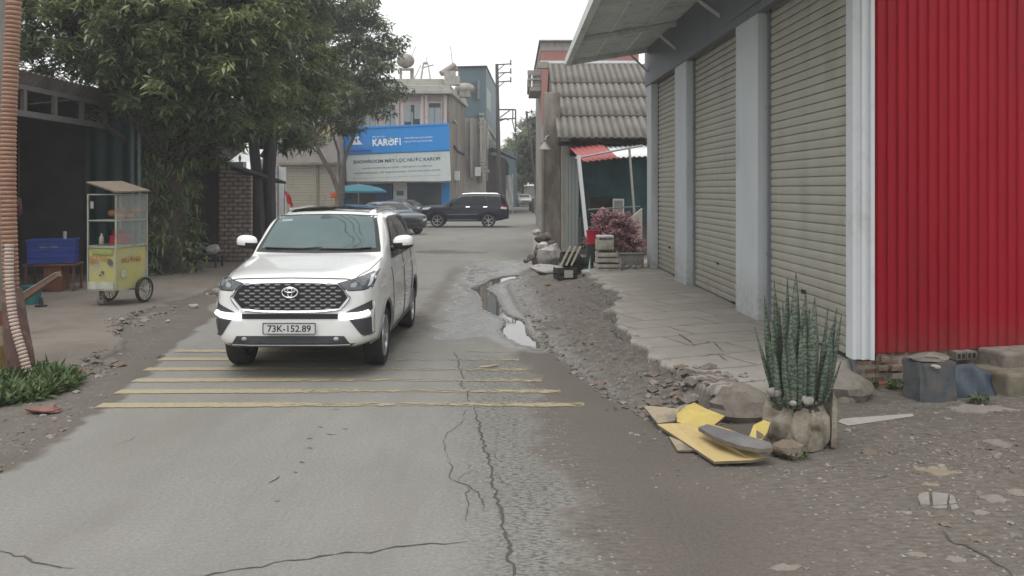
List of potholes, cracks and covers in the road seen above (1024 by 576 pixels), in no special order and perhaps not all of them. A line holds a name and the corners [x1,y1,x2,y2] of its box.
crack [2,551,67,568]
pothole [467,275,546,350]
crack [204,541,465,576]
crack [943,530,1013,576]
crack [443,352,516,576]
